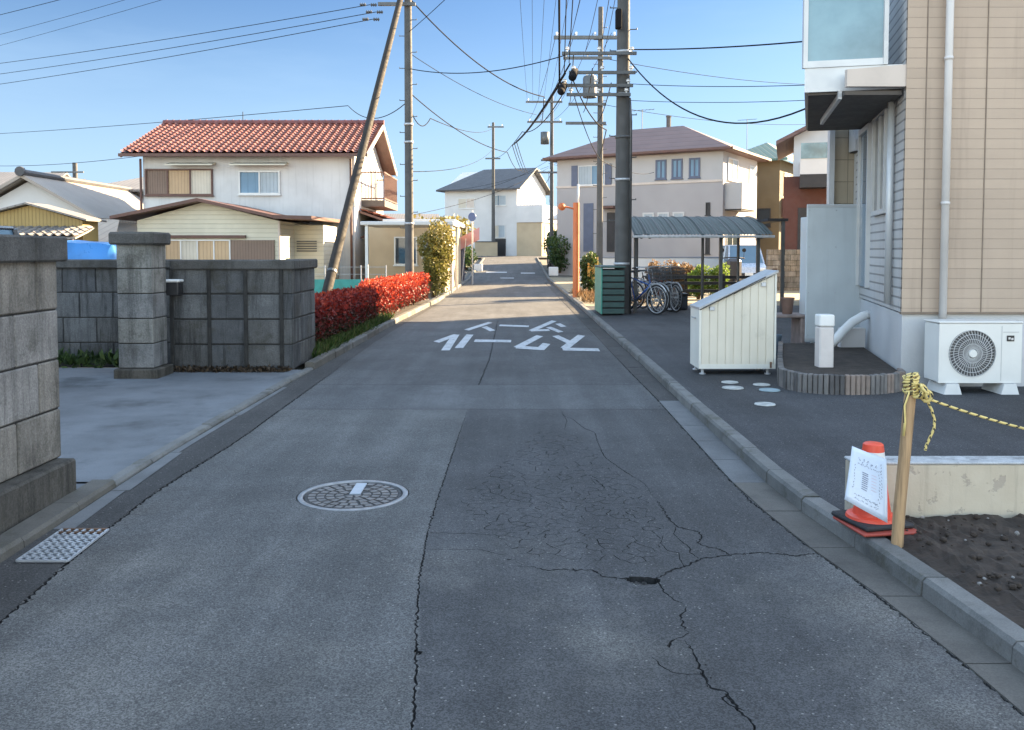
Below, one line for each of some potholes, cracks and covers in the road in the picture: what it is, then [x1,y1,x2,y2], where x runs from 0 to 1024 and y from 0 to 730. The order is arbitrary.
crack [457,415,814,730]
pothole [626,576,660,585]
manhole cover [297,480,408,511]
drain grate [14,528,111,563]
